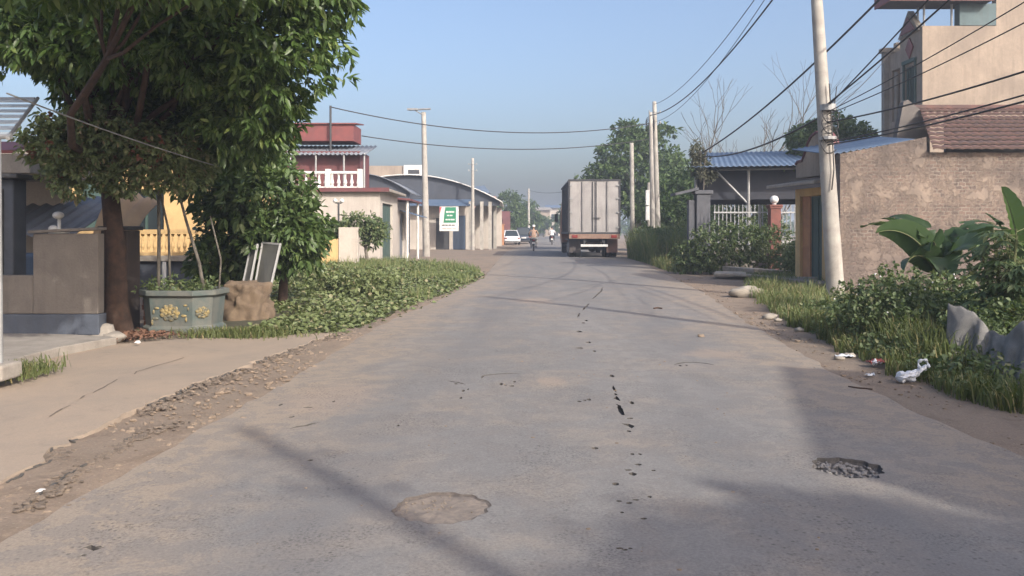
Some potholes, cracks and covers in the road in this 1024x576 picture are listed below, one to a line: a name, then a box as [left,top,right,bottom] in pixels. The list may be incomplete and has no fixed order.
pothole [812,457,885,478]
crack [451,373,518,399]
